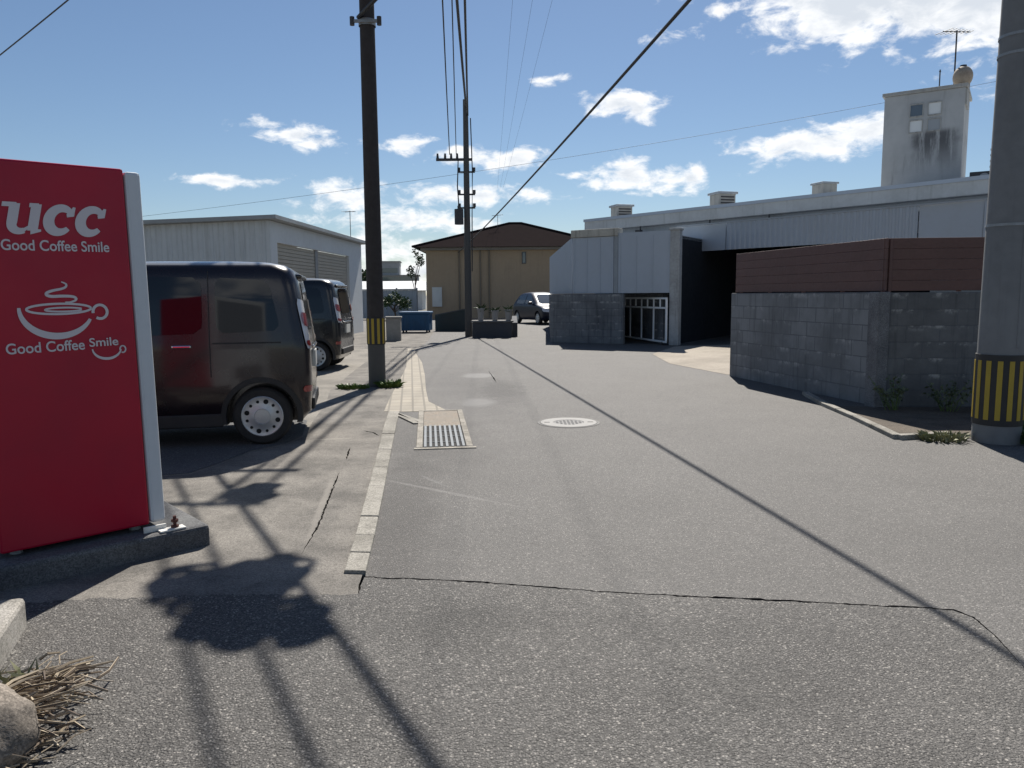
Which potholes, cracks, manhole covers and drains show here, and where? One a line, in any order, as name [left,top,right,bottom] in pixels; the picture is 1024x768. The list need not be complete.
crack [358,576,1024,667]
manhole cover [538,417,600,428]
crack [302,449,350,553]
drain grate [414,409,477,450]
